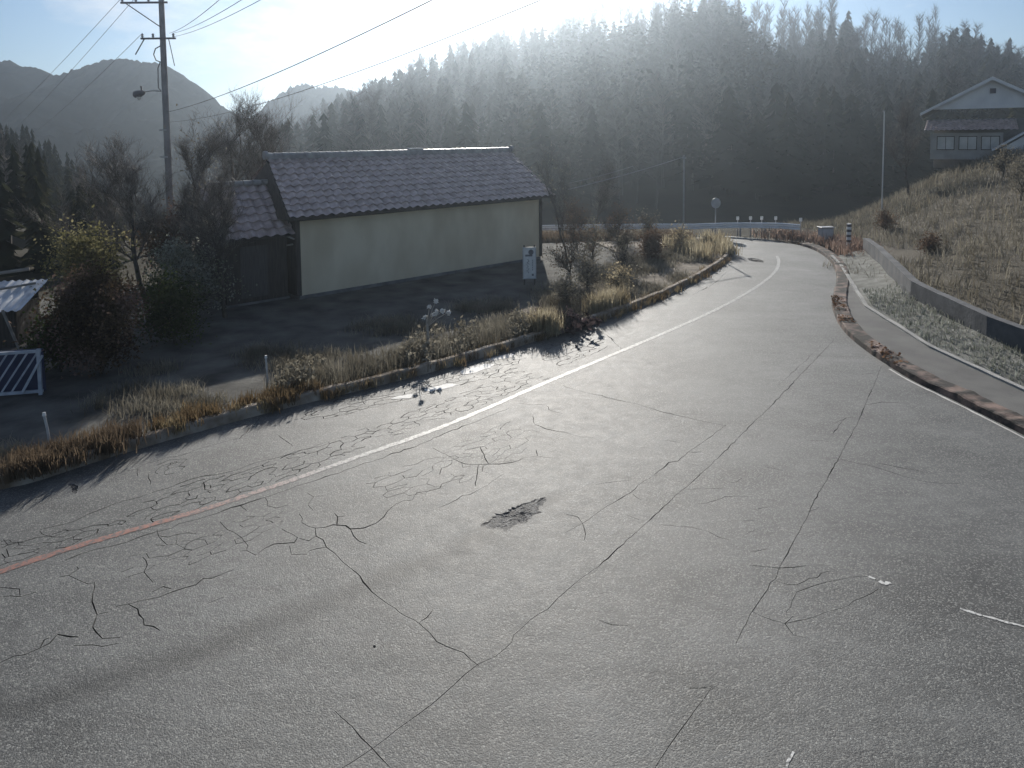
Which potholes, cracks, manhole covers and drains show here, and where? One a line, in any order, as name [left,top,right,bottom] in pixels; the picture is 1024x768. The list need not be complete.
crack [671,480,767,552]
crack [565,425,726,540]
crack [0,358,593,666]
crack [335,711,389,766]
crack [752,571,878,638]
pothole [480,497,547,532]
